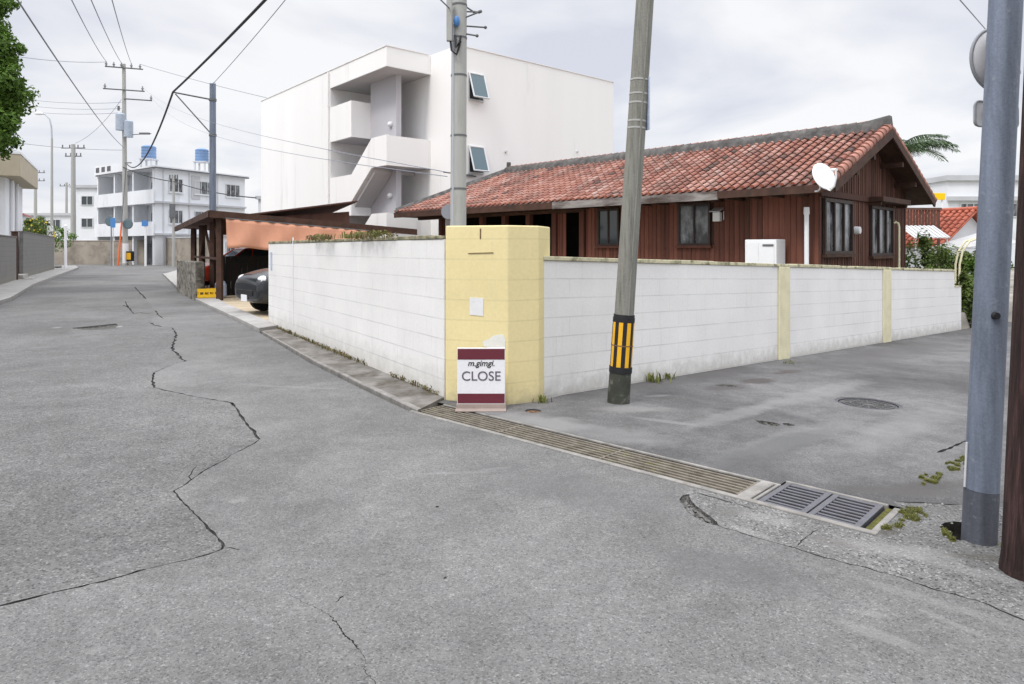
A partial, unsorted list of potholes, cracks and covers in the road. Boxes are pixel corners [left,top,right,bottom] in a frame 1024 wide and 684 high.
crack [937,441,966,453]
crack [720,526,1024,621]
pothole [679,494,719,526]
crack [0,287,260,606]
crack [294,596,376,684]
manhole cover [835,398,902,410]
drain grate [409,404,878,570]
